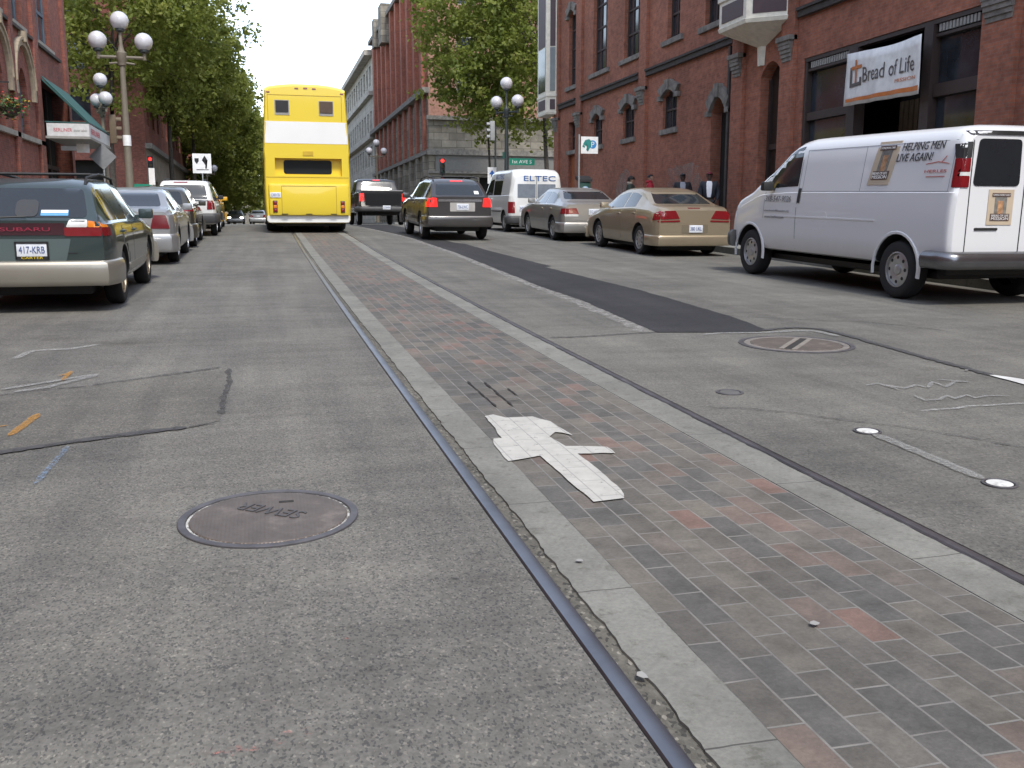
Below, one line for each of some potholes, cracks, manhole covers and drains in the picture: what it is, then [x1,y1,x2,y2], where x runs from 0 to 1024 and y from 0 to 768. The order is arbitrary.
manhole cover [177,490,358,549]
manhole cover [738,336,855,353]
